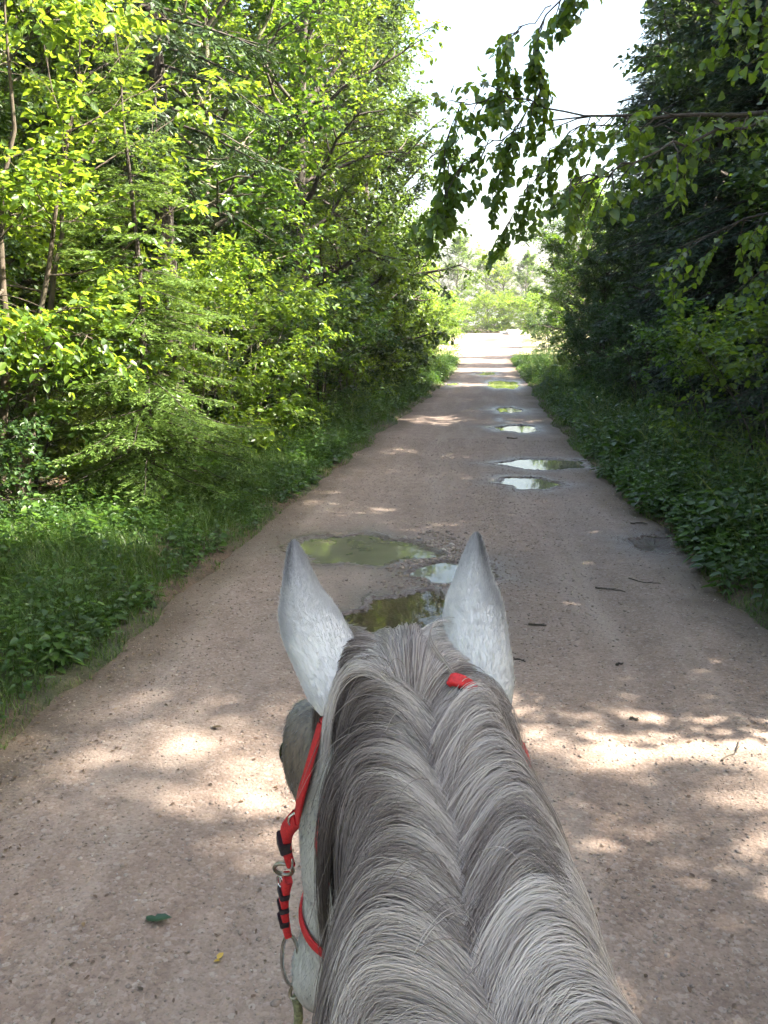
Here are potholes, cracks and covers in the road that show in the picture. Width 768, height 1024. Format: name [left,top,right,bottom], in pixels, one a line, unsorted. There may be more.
pothole [340,585,447,635]
pothole [279,530,451,569]
pothole [623,533,685,555]
pothole [488,424,541,433]
pothole [483,379,523,390]
pothole [493,475,570,491]
pothole [489,457,596,471]
pothole [400,559,504,586]
